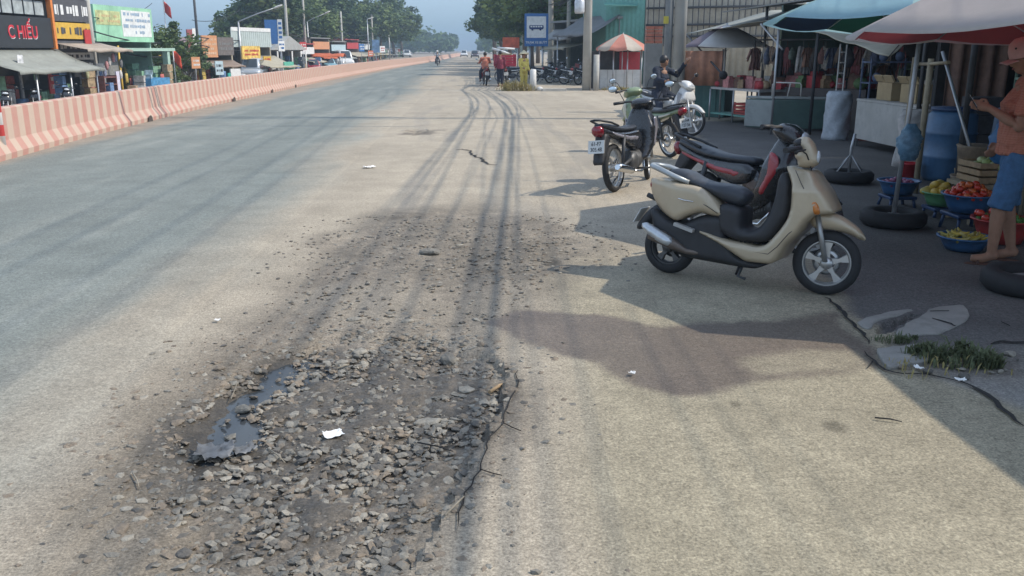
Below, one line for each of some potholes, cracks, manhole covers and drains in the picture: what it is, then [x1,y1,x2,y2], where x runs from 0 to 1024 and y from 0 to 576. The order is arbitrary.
crack [458,370,521,524]
crack [826,297,1024,426]
pothole [118,330,510,576]
